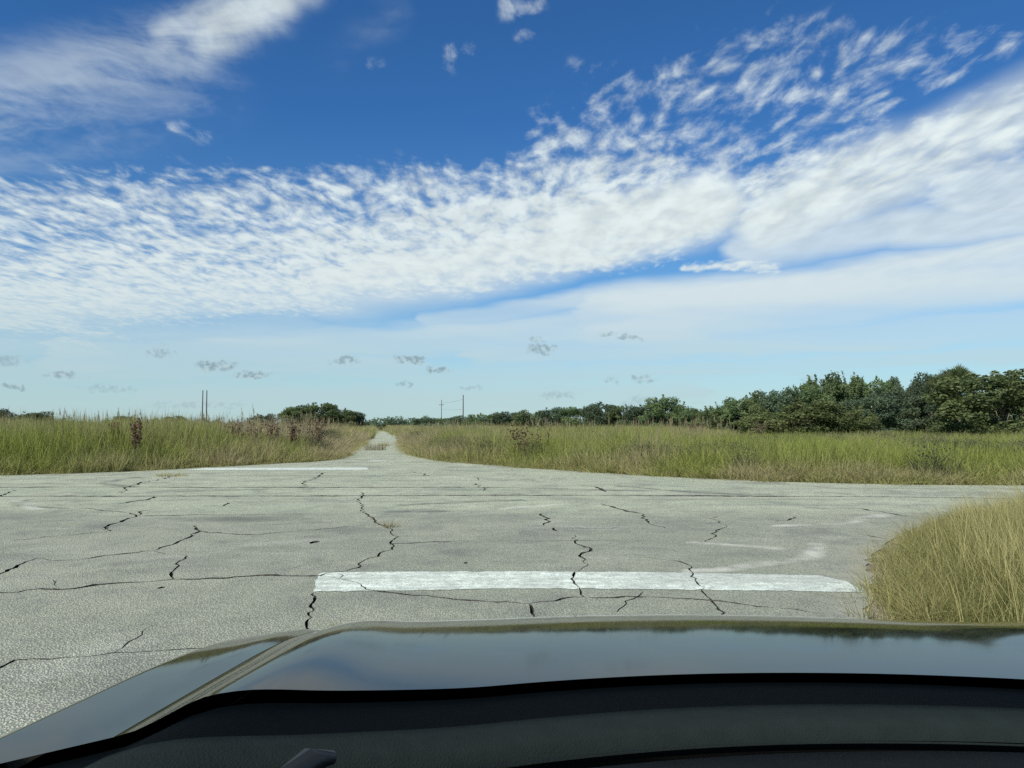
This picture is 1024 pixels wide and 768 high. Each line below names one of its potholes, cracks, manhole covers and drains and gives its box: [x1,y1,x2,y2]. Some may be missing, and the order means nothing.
crack [0,476,823,629]
crack [0,624,199,668]
